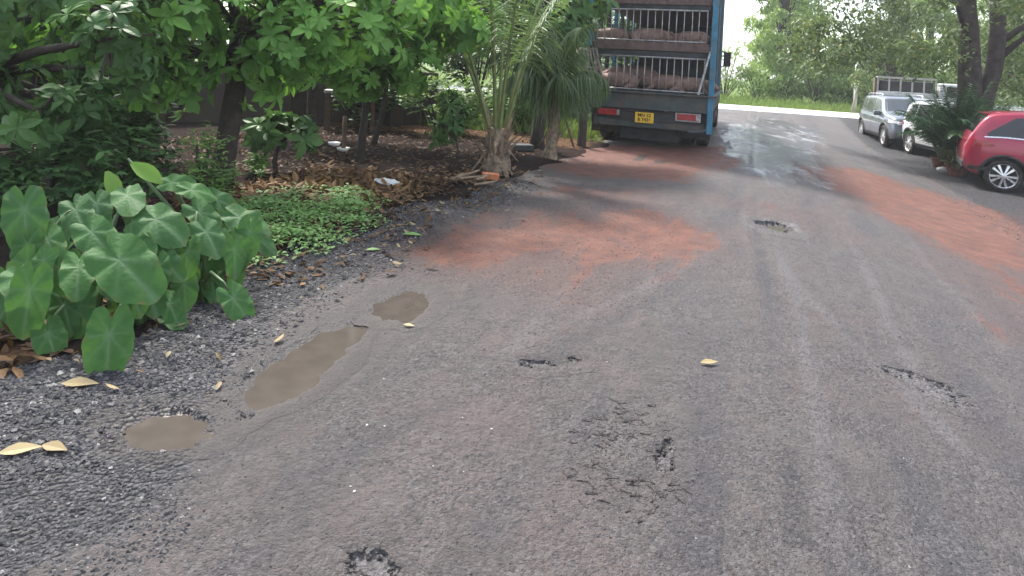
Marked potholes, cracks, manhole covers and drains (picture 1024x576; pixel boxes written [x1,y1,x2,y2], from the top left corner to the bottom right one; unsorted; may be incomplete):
pothole [498,350,576,379]
crack [482,386,743,538]
pothole [732,215,816,242]
pothole [548,348,601,374]
